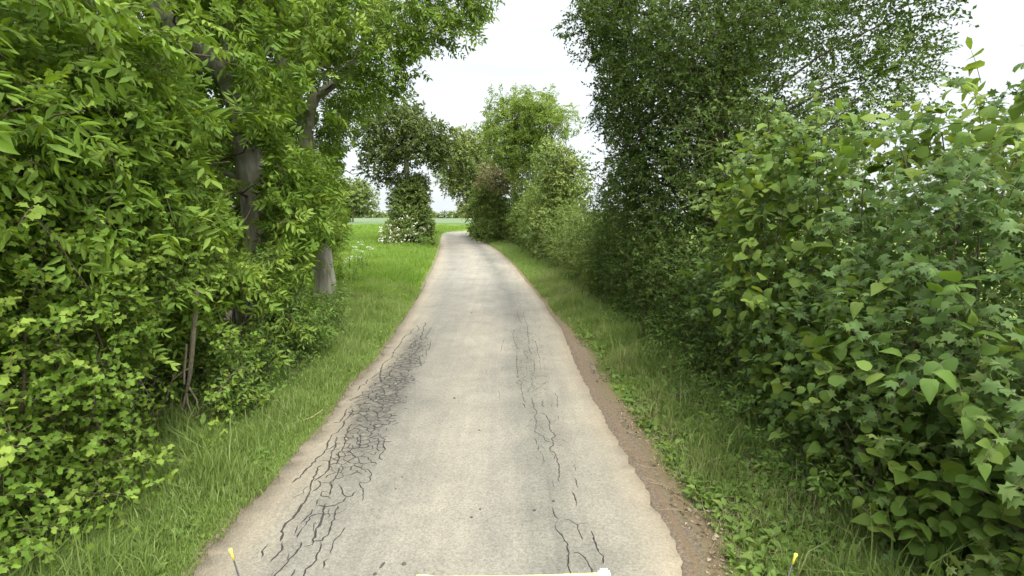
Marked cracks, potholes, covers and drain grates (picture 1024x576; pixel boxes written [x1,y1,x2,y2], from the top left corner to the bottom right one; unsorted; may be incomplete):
crack [498,292,604,574]
